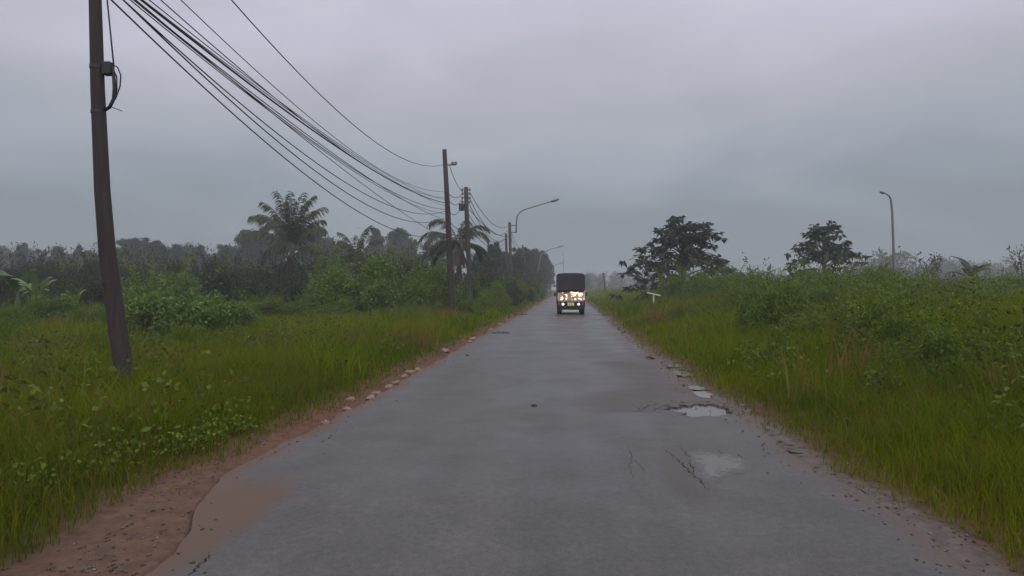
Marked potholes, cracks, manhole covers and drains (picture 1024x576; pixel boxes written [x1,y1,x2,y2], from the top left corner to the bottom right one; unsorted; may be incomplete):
crack [186,551,214,576]
pothole [665,403,732,417]
crack [664,447,705,487]
